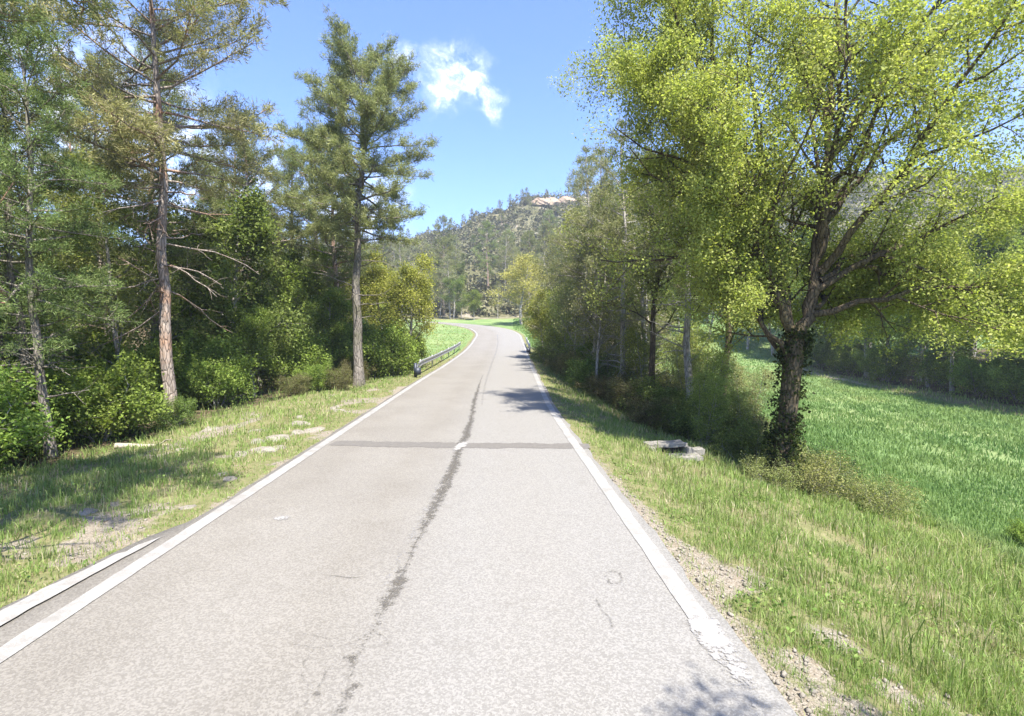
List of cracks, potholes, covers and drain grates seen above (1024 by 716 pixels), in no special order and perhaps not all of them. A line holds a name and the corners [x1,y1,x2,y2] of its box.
crack [314,384,480,715]
